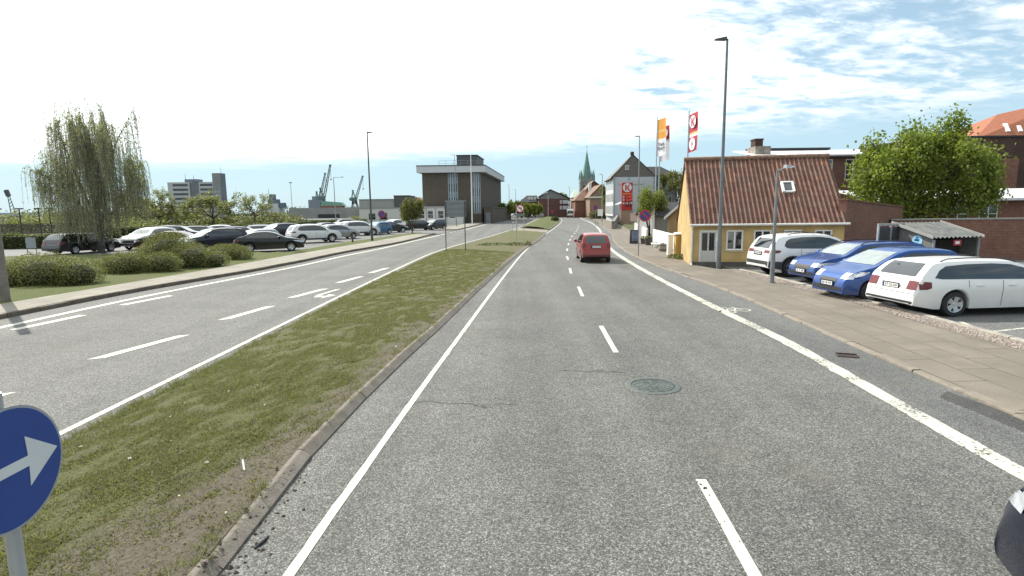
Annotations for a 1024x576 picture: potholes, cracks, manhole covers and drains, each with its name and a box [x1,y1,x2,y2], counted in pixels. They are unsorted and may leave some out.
manhole cover [625,377,682,395]
